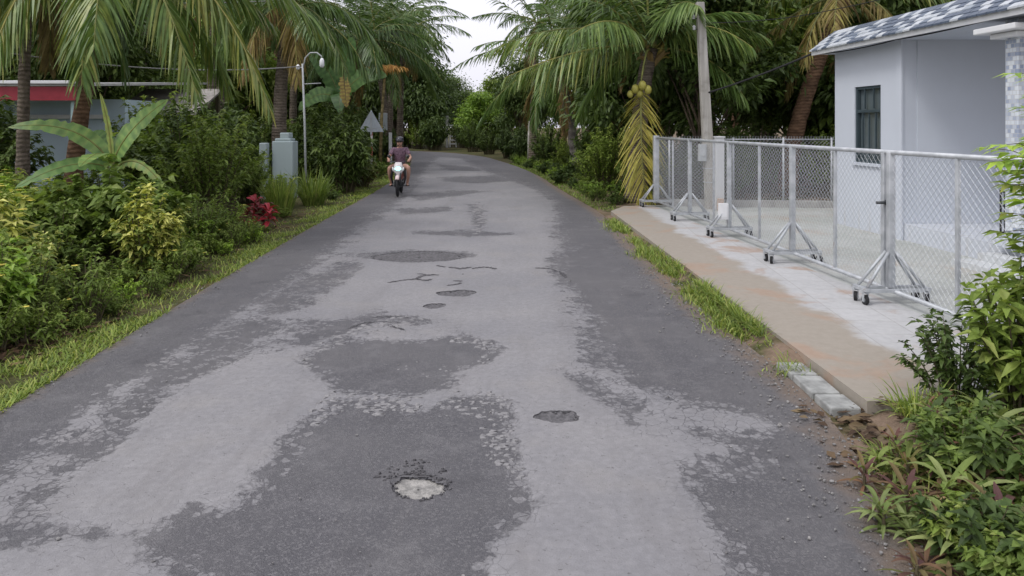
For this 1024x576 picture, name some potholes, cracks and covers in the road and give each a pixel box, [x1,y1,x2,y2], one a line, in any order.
crack [387,265,497,286]
pothole [414,302,454,311]
pothole [378,471,463,507]
pothole [427,288,486,299]
pothole [362,249,474,263]
pothole [523,406,592,429]
